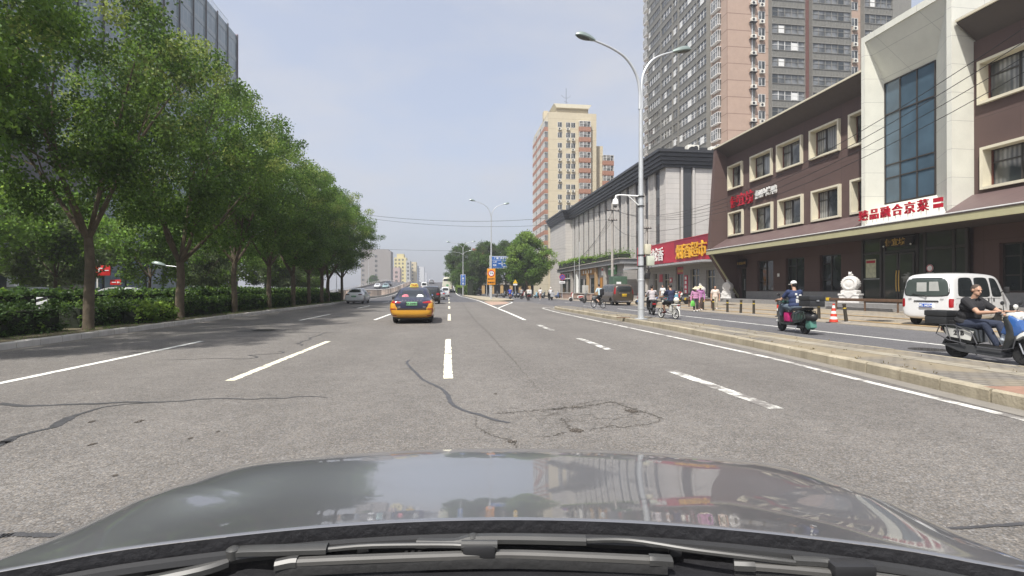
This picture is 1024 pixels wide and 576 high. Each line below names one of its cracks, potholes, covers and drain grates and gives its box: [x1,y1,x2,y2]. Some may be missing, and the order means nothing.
crack [494,400,668,438]
